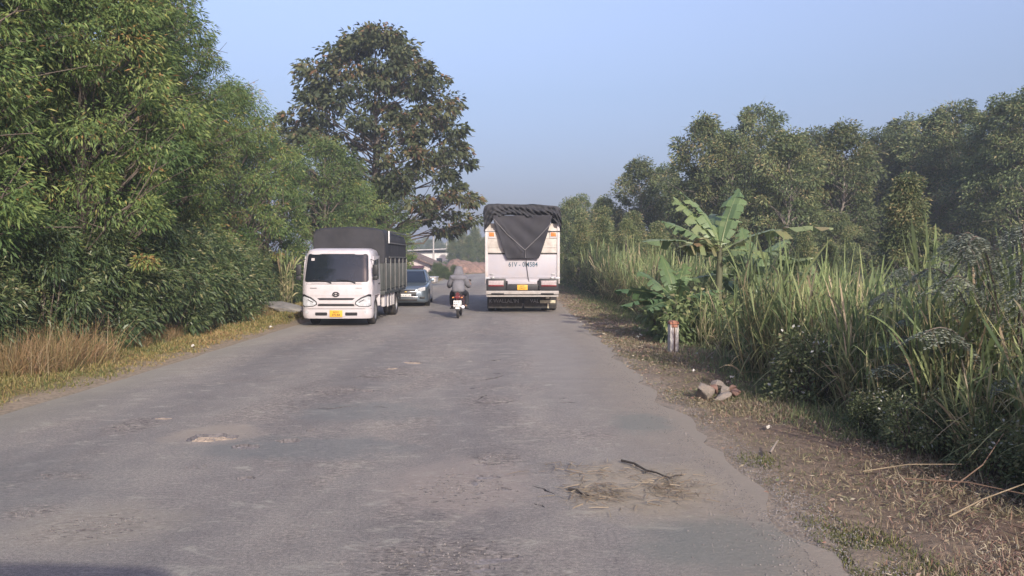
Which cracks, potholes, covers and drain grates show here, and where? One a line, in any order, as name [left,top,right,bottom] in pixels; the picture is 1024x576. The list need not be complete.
pothole [186,433,246,442]
